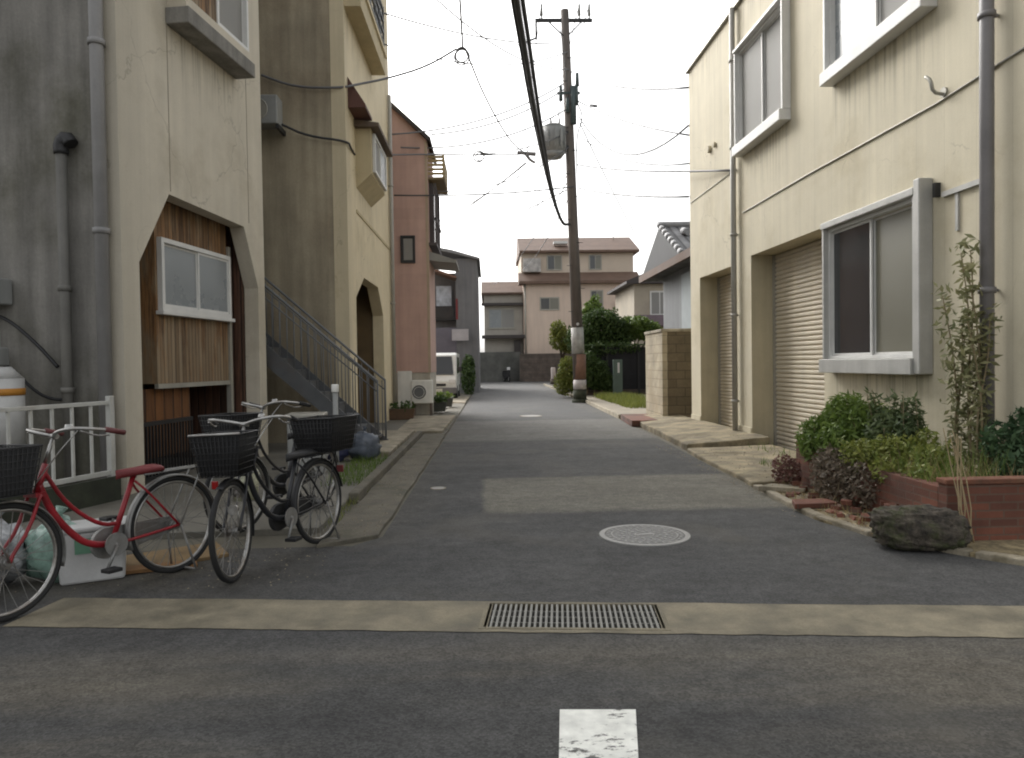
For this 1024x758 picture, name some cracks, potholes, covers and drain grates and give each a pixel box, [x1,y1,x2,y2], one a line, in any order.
manhole cover [599,524,691,546]
drain grate [478,602,671,631]
